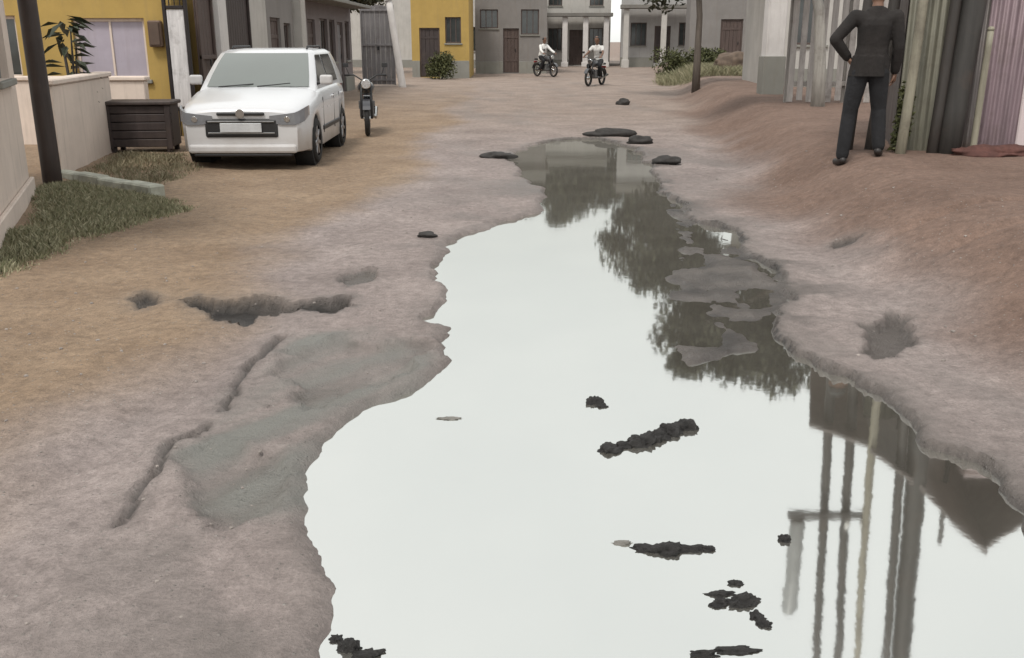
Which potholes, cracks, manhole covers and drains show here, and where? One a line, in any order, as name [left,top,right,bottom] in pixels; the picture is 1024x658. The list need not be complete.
crack [109,334,290,529]
pothole [181,294,355,327]
pothole [279,137,1024,658]
pothole [129,291,160,309]
